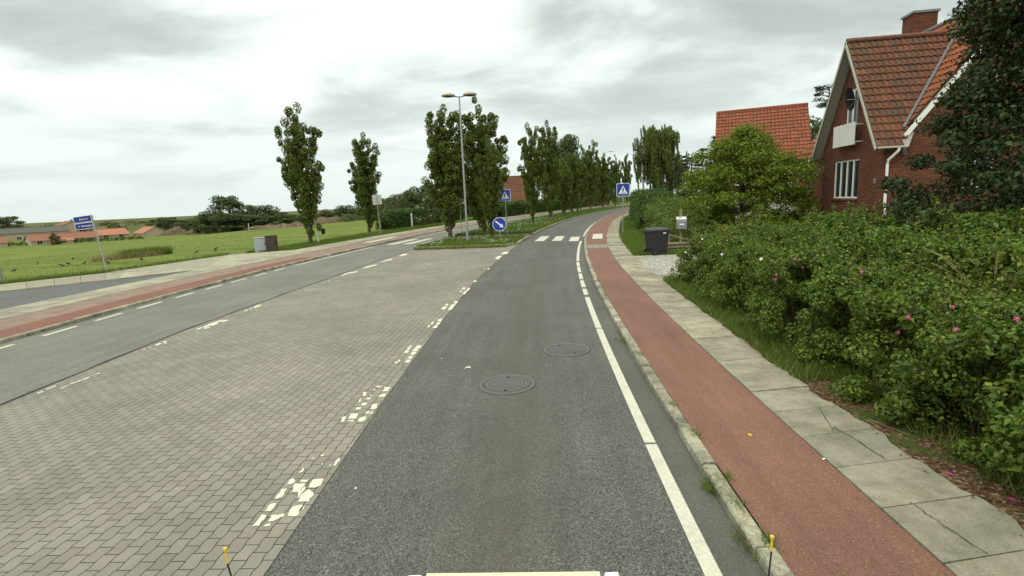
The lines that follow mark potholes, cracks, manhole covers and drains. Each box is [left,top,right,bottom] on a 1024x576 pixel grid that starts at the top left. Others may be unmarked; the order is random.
manhole cover [478,374,536,395]
crack [910,501,988,554]
manhole cover [543,343,590,357]
